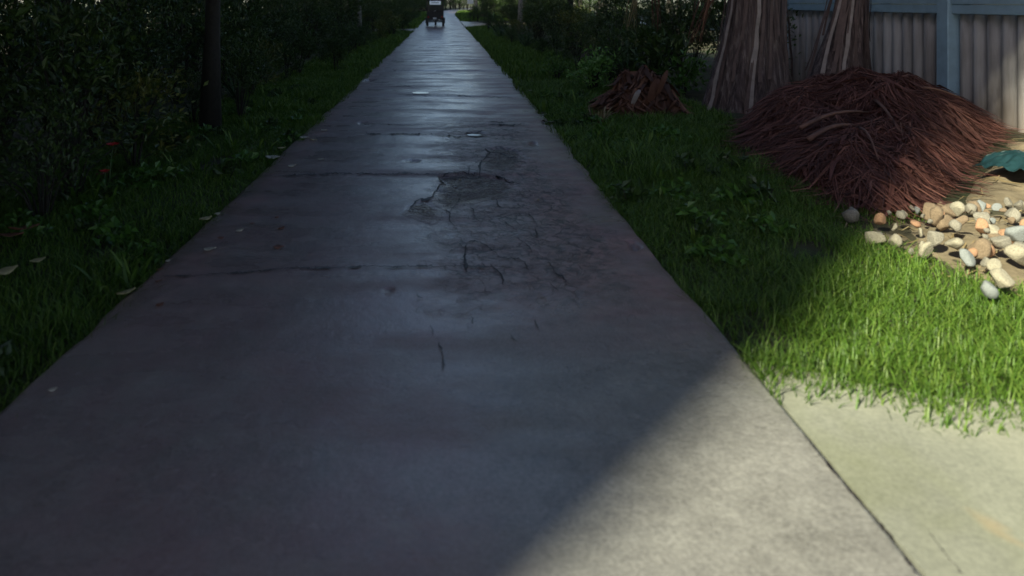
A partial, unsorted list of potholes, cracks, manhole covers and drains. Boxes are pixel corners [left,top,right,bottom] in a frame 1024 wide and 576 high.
crack [366,121,538,284]
pothole [431,174,514,211]
